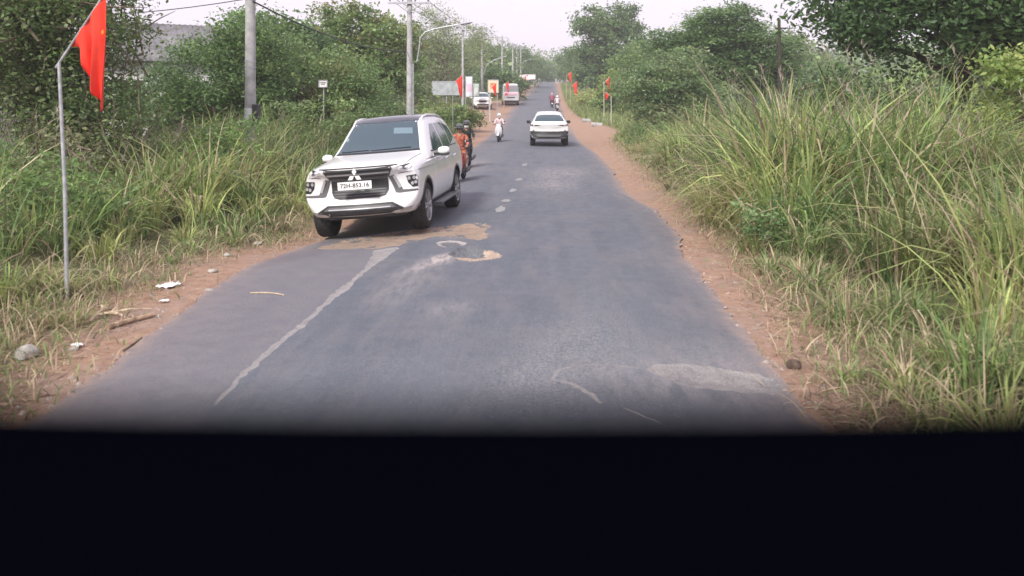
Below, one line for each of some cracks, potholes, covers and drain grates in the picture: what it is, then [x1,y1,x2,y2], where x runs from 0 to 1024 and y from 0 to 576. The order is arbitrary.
pothole [449,246,503,262]
crack [551,364,637,403]
